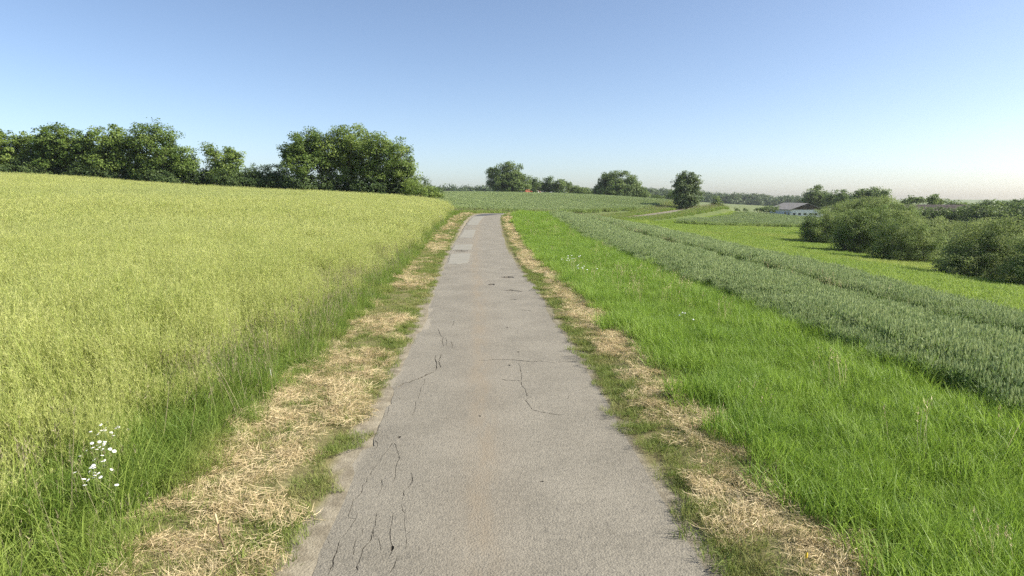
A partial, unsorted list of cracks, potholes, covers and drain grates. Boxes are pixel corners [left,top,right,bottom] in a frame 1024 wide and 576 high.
crack [328,405,413,574]
